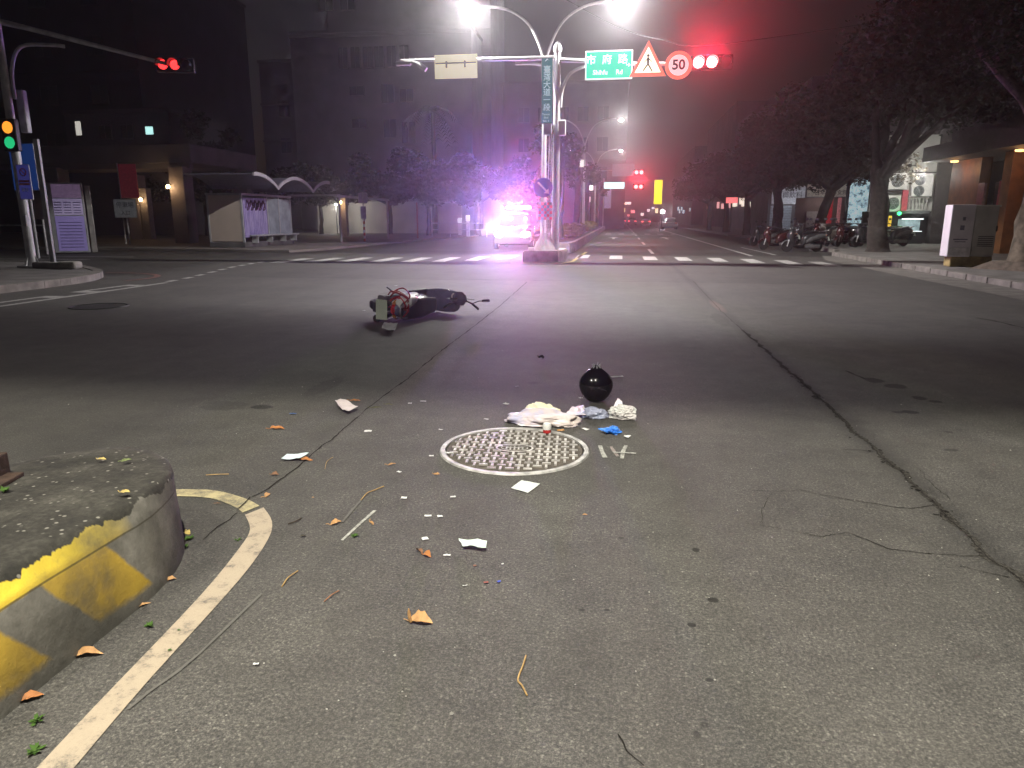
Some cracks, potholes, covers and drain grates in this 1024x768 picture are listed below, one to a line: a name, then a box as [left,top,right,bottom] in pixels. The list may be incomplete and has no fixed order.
manhole cover [440,427,589,476]
